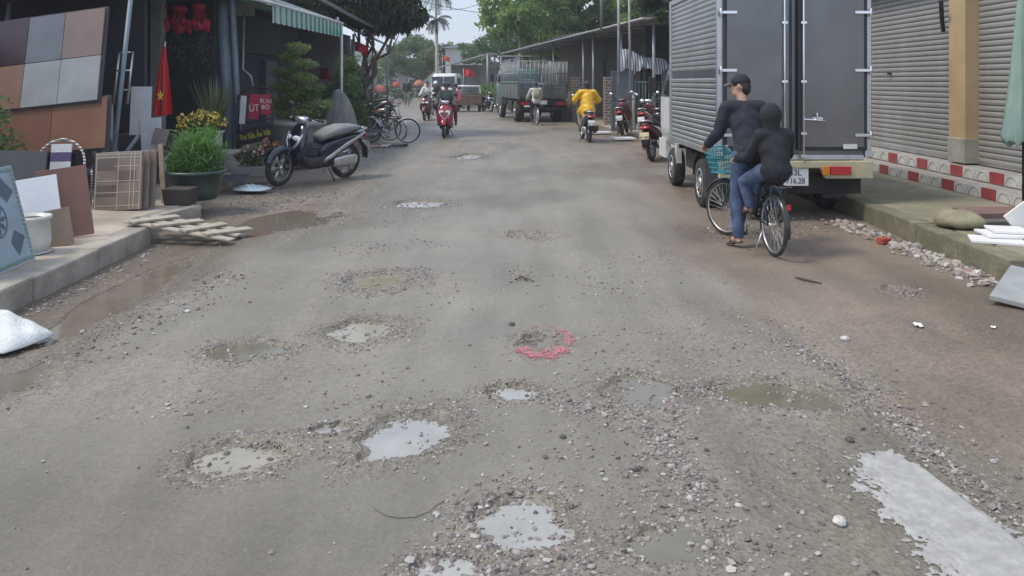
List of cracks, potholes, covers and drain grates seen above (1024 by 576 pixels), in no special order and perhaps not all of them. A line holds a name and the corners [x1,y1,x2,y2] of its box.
pothole [678,374,881,425]
pothole [168,432,321,487]
pothole [475,380,561,404]
pothole [382,198,455,210]
pothole [331,268,427,296]
pothole [450,483,598,565]
pothole [193,337,301,365]
pothole [498,229,569,242]
pothole [334,403,476,474]
pothole [508,329,572,351]
pothole [607,517,735,572]
pothole [395,546,499,576]
